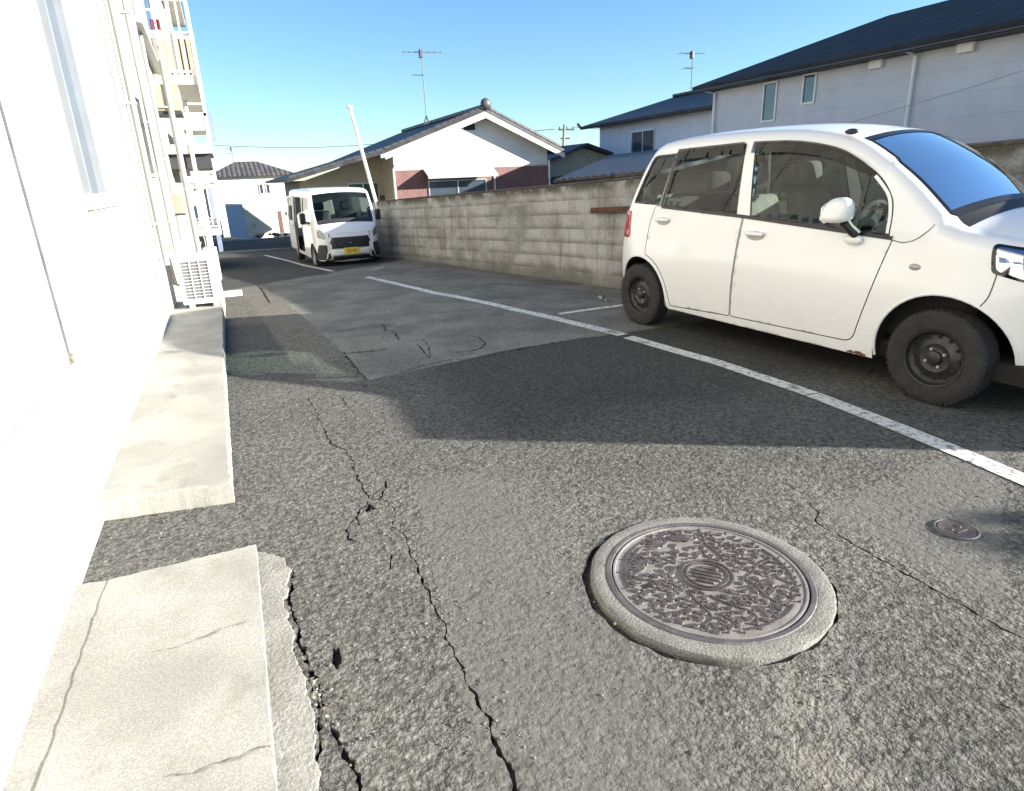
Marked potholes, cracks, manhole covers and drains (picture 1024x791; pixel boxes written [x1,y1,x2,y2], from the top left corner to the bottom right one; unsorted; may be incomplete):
manhole cover [581,517,839,669]
crack [306,395,519,791]
pothole [331,648,342,669]
crack [809,502,1024,639]
manhole cover [932,518,981,541]
